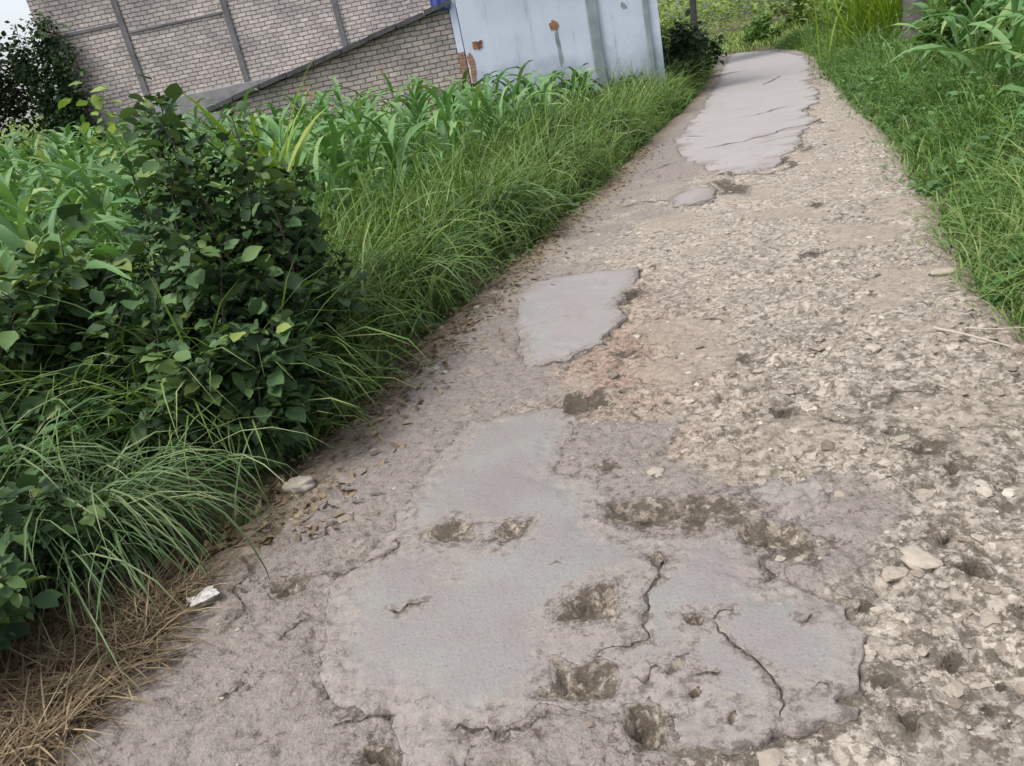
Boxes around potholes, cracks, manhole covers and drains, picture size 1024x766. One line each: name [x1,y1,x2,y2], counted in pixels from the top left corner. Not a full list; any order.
pothole [547,579,621,627]
crack [332,714,393,727]
crack [329,539,401,576]
pothole [486,517,534,545]
crack [455,713,548,739]
pothole [621,696,676,755]
crack [229,534,276,624]
crack [707,106,824,176]
pothole [534,654,622,705]
crack [696,608,813,719]
crack [596,560,664,684]
pothole [559,387,612,417]
